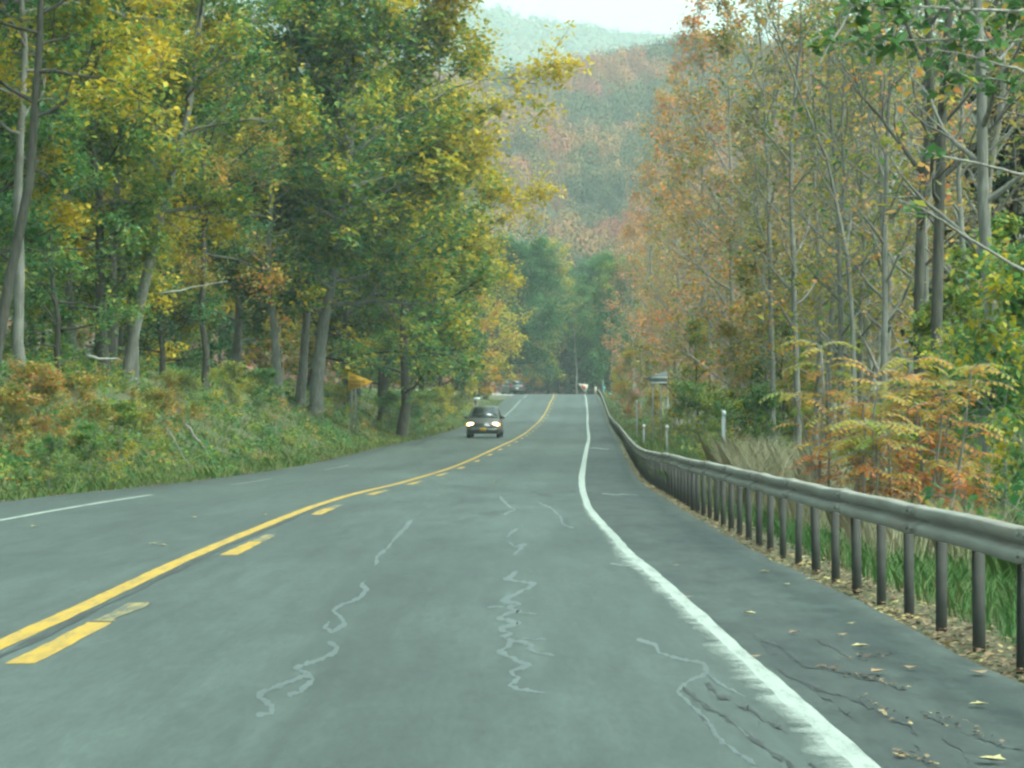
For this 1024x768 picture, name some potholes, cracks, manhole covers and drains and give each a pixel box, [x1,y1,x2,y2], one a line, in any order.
crack [451,485,579,531]
crack [636,634,1023,768]
